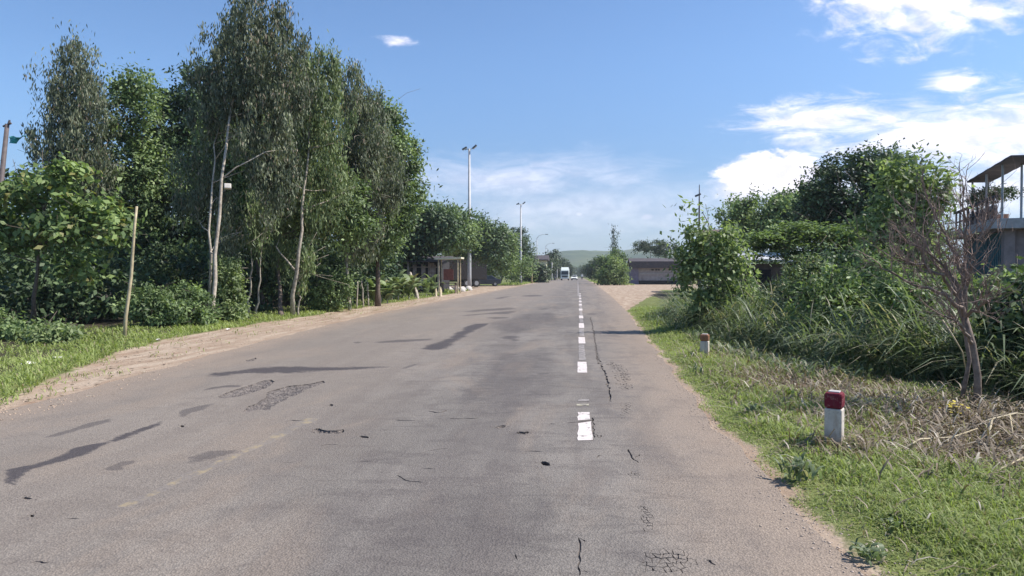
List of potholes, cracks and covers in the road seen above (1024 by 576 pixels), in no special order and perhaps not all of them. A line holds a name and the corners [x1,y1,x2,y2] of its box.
crack [589,317,631,416]
pothole [244,381,325,413]
crack [577,537,588,575]
pothole [218,380,275,398]
